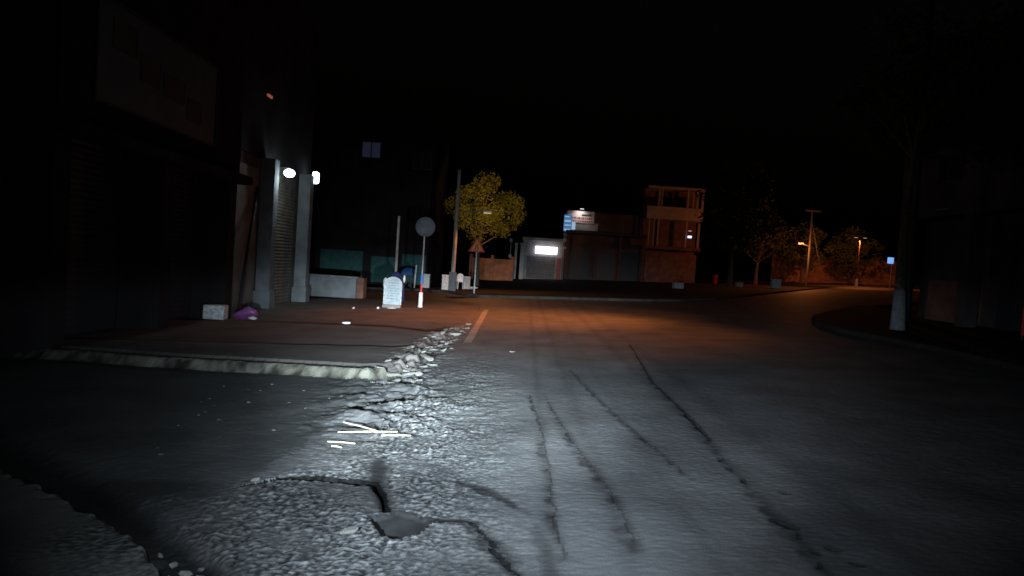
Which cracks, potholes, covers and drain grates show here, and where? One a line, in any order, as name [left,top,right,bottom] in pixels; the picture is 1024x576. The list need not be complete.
crack [433,518,520,576]
crack [240,475,391,513]
pothole [367,511,435,540]
crack [529,344,867,570]
